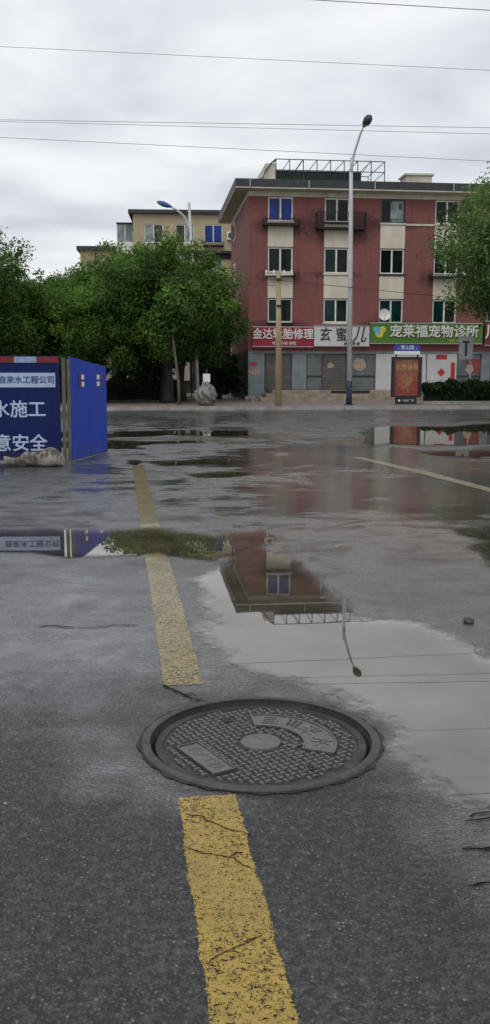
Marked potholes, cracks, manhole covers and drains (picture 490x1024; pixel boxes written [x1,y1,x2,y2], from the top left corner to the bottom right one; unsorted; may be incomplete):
crack [185,813,253,869]
crack [207,935,262,964]
crack [162,684,205,701]
manhole cover [136,696,385,795]
crack [465,811,490,821]
